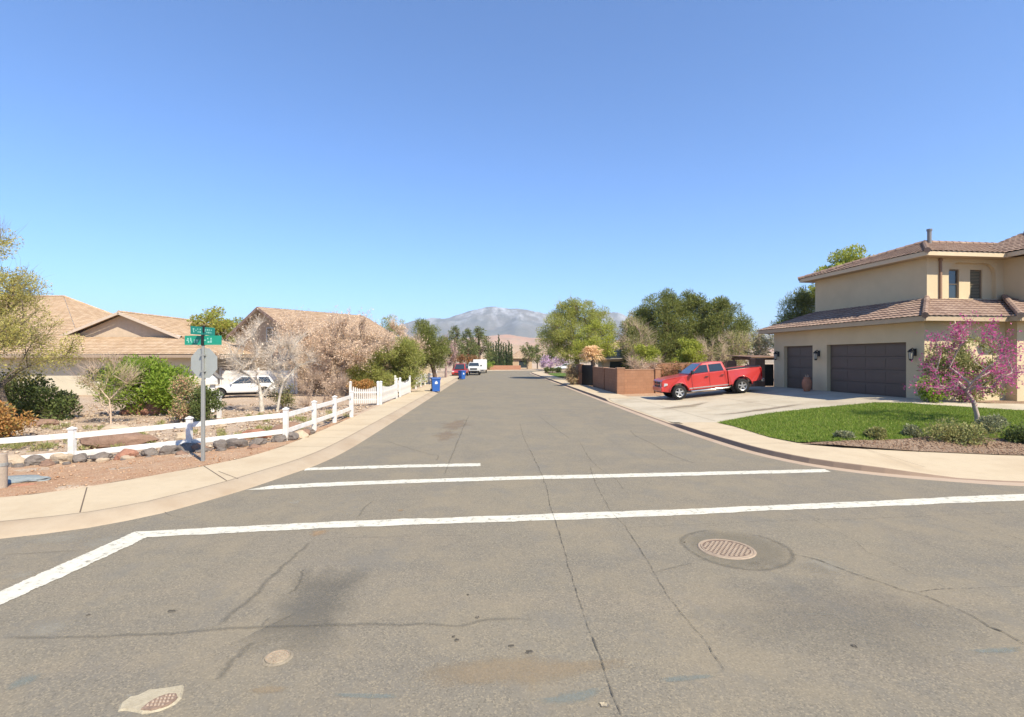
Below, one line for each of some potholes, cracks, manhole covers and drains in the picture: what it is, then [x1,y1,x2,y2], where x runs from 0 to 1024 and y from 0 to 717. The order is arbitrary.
manhole cover [261,649,294,667]
crack [582,446,1017,670]
manhole cover [118,685,184,714]
crack [520,425,621,714]
